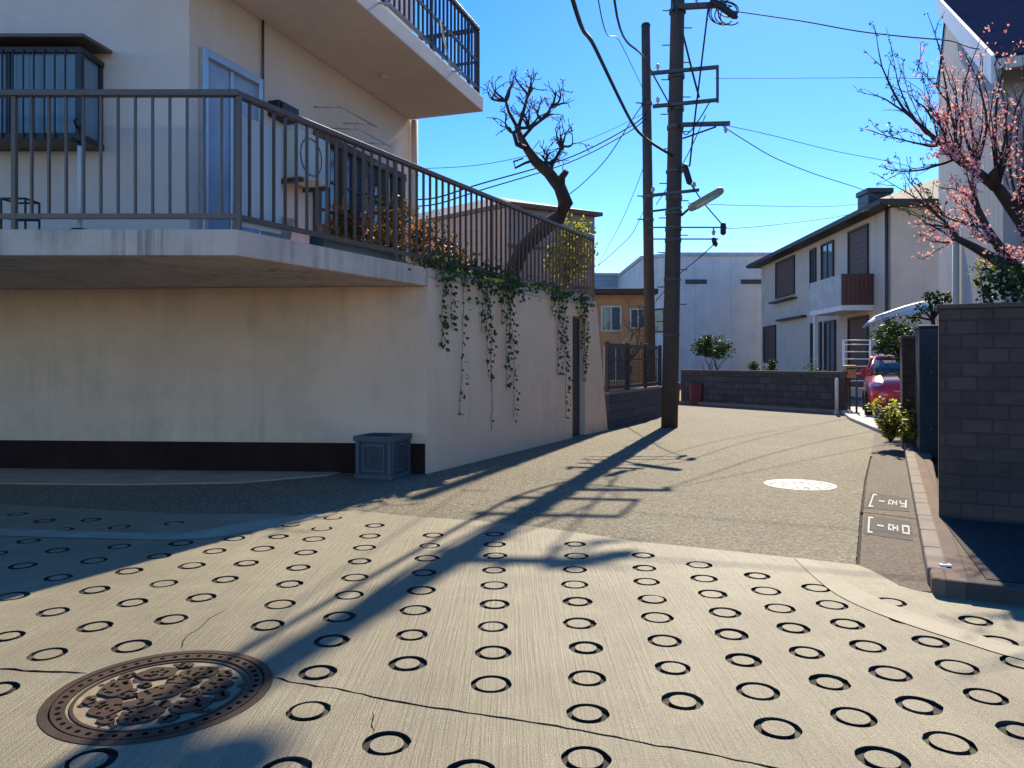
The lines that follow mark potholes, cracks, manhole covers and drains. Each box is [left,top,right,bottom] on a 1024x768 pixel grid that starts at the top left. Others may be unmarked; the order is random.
manhole cover [764,479,837,491]
manhole cover [37,650,273,746]
